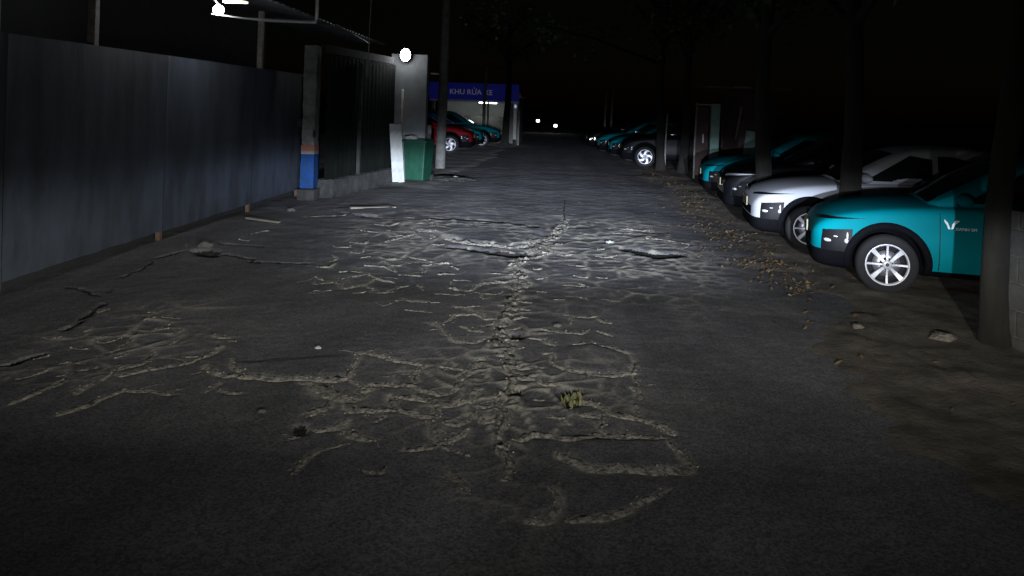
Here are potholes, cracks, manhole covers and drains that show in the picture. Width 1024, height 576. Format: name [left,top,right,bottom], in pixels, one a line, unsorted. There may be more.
crack [0,194,699,526]
pothole [621,249,685,259]
pothole [447,247,527,258]
